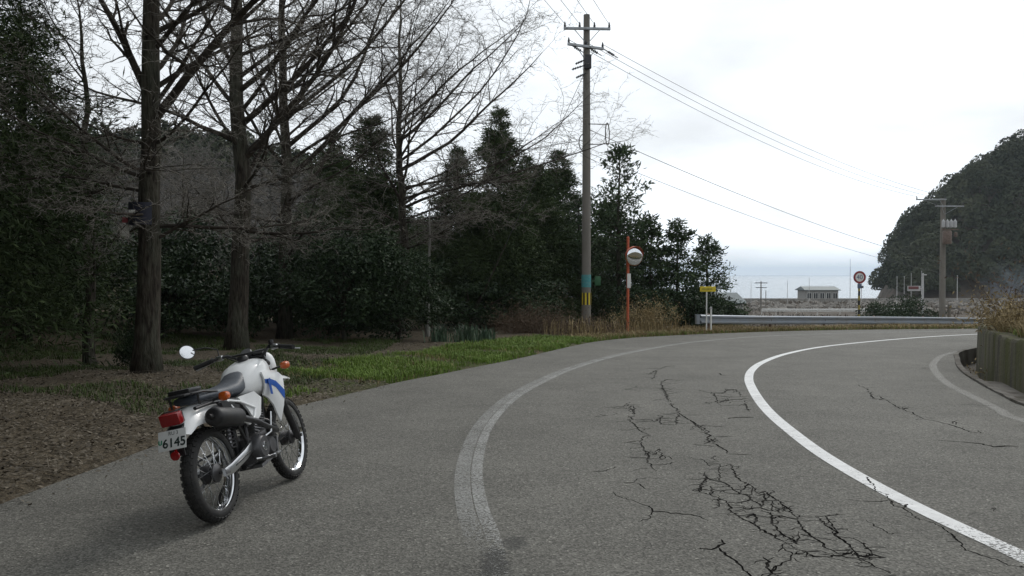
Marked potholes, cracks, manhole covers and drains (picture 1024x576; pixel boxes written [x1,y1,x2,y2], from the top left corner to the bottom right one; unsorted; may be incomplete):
crack [593,366,1024,576]
